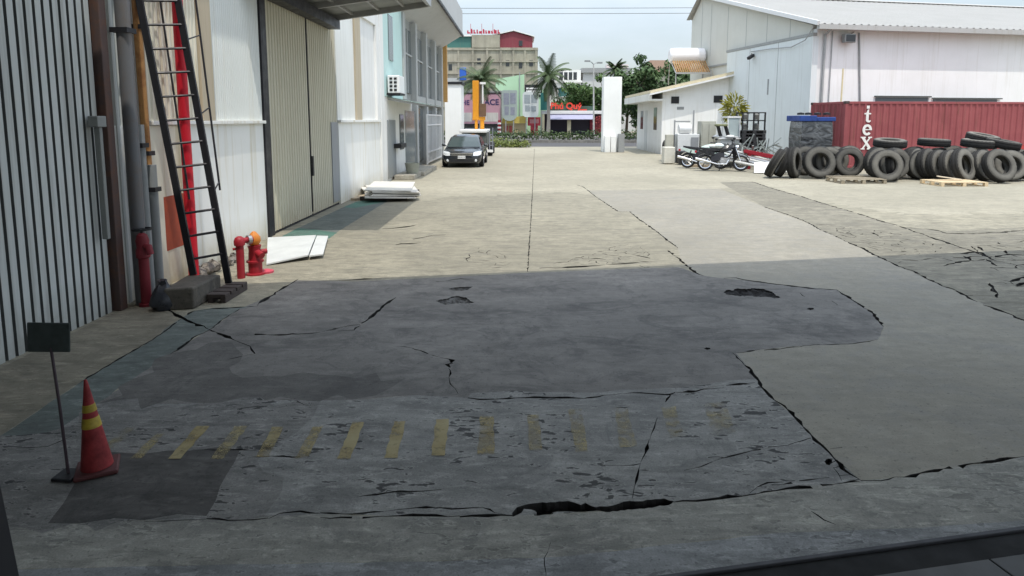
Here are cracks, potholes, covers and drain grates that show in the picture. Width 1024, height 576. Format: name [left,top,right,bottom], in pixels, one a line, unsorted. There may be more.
crack [167,279,395,359]
pothole [724,288,781,298]
crack [546,185,700,275]
crack [687,278,1024,483]
crack [765,207,1024,321]
pothole [438,296,474,305]
